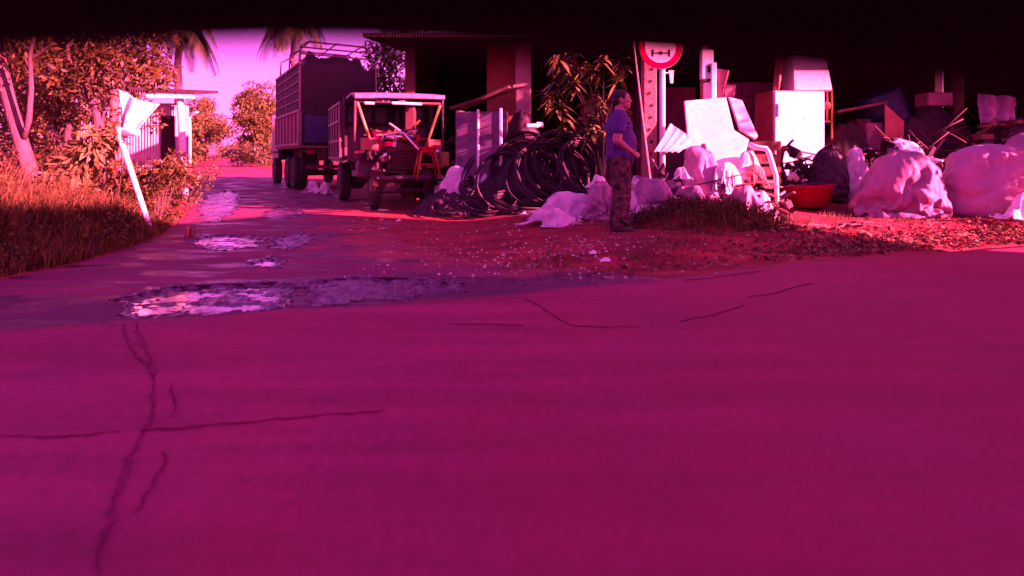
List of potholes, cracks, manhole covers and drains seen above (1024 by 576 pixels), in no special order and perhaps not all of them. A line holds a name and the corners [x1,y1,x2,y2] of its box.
pothole [187,232,269,251]
crack [1,322,384,573]
pothole [240,254,301,269]
pothole [260,230,316,251]
pothole [103,279,311,322]
pothole [194,189,241,222]
pothole [295,275,477,308]
crack [452,298,640,328]
crack [681,283,813,322]
